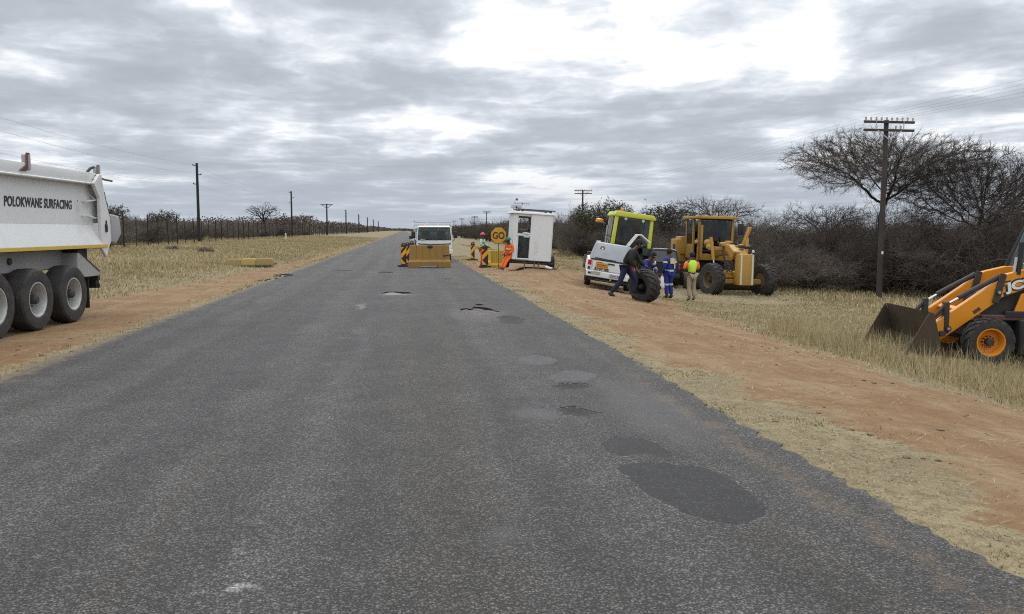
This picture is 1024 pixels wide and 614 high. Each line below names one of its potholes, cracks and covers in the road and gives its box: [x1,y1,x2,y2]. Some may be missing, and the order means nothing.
pothole [556,406,603,417]
pothole [461,307,499,316]
